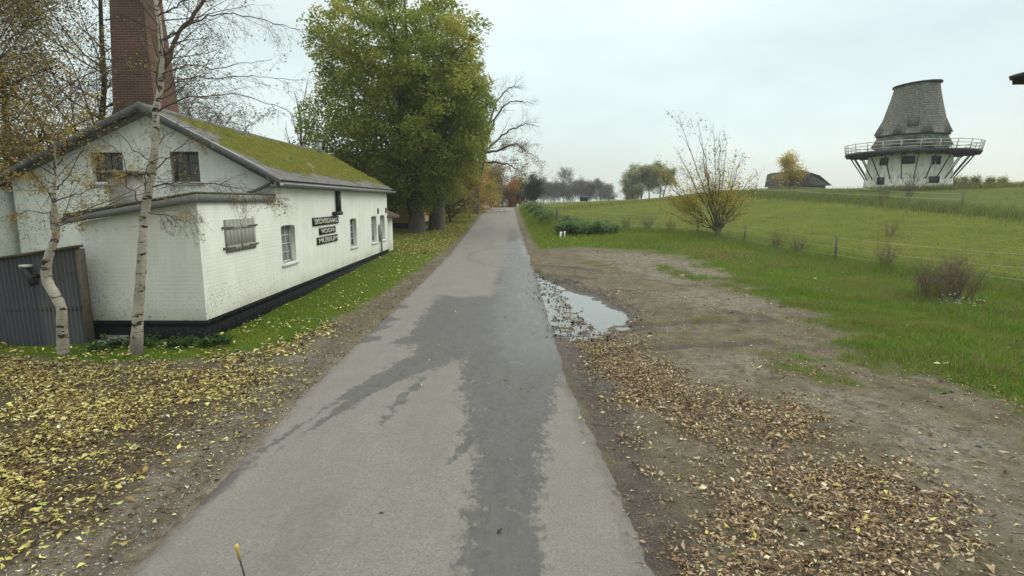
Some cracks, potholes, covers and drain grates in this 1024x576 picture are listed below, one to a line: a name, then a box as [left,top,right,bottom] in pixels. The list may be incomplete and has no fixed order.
pothole [537,278,637,342]
